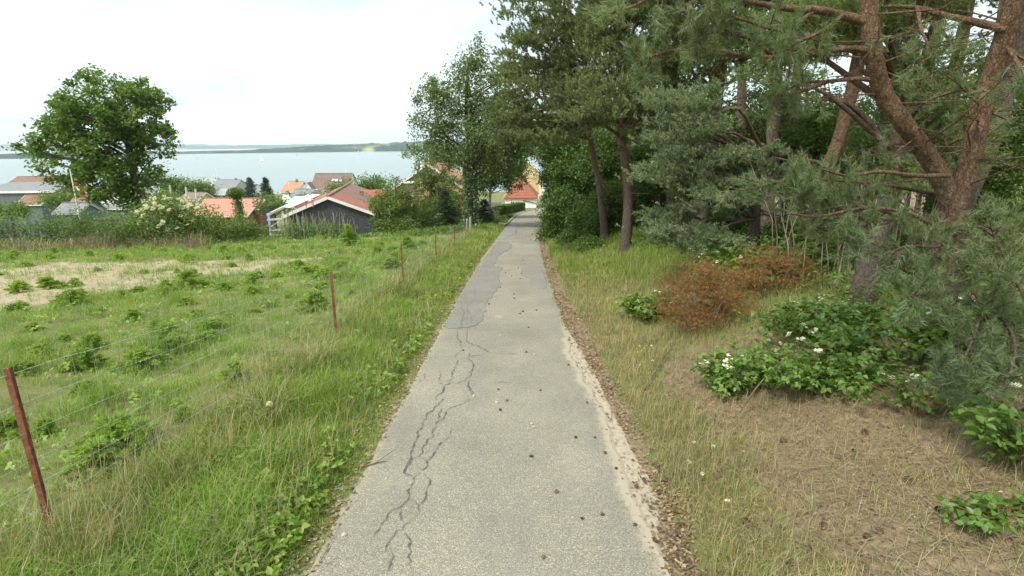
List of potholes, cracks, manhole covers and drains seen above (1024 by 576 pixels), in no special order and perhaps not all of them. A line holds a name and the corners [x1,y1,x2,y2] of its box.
crack [372,331,483,571]
